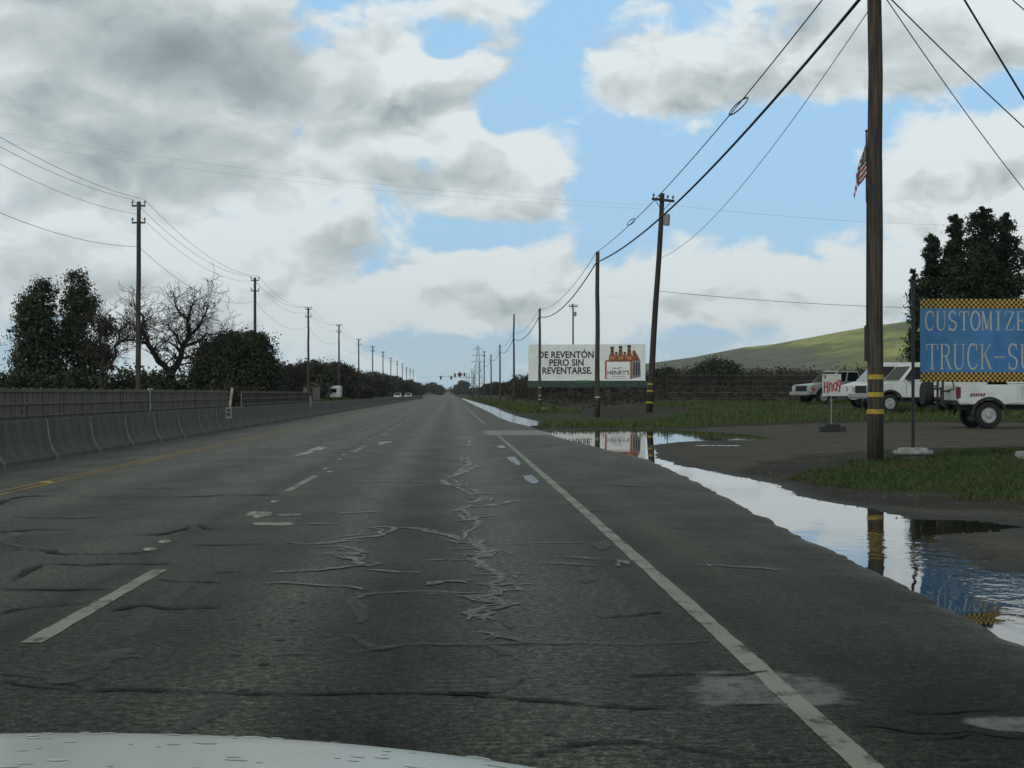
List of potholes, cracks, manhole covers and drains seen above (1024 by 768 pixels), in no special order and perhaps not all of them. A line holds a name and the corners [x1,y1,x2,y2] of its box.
crack [268,445,631,676]
crack [0,487,282,613]
